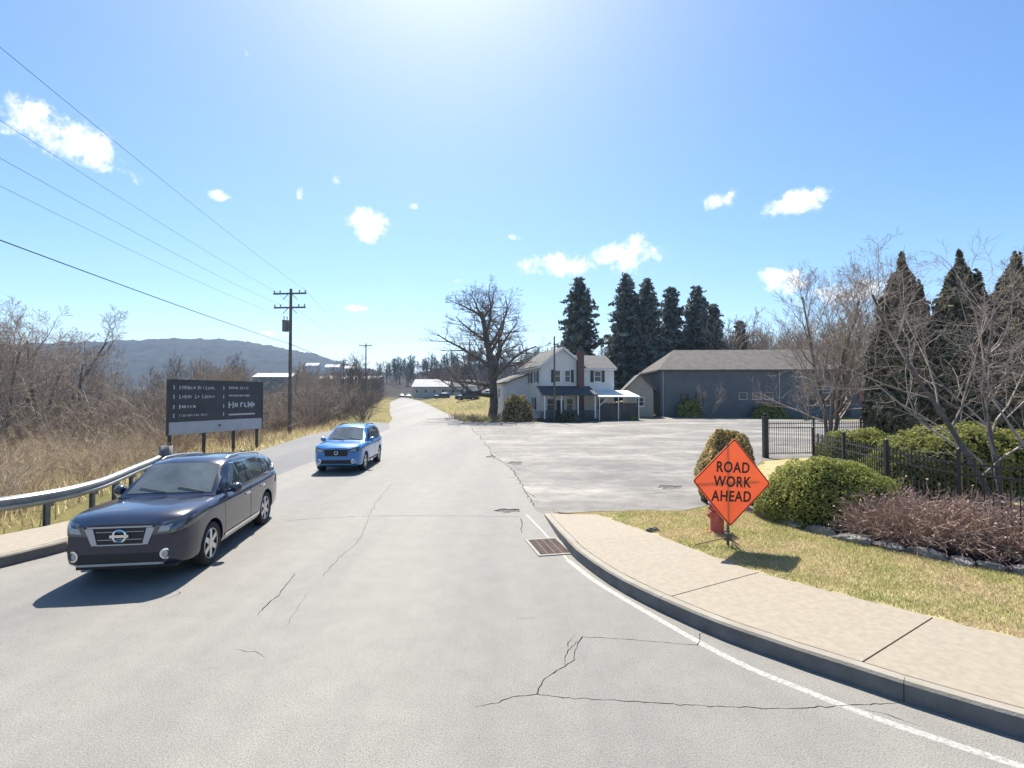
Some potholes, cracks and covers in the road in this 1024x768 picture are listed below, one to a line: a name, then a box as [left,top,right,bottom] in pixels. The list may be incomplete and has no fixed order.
crack [300,432,536,532]
crack [476,632,919,726]
drain grate [525,537,571,557]
